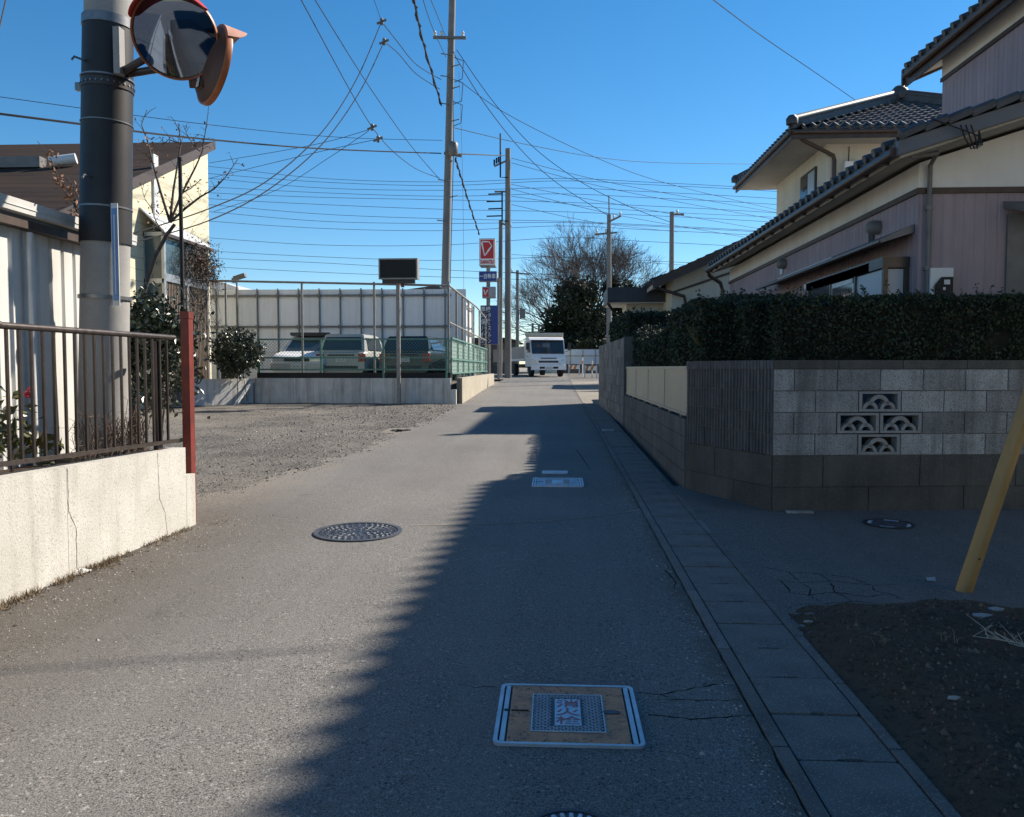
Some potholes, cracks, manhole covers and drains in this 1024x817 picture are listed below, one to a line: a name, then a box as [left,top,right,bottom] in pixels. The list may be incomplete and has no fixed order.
crack [764,567,904,604]
manhole cover [863,518,915,529]
manhole cover [532,478,584,487]
manhole cover [493,683,645,749]
crack [636,684,754,720]
manhole cover [534,808,605,817]
manhole cover [313,522,402,542]
